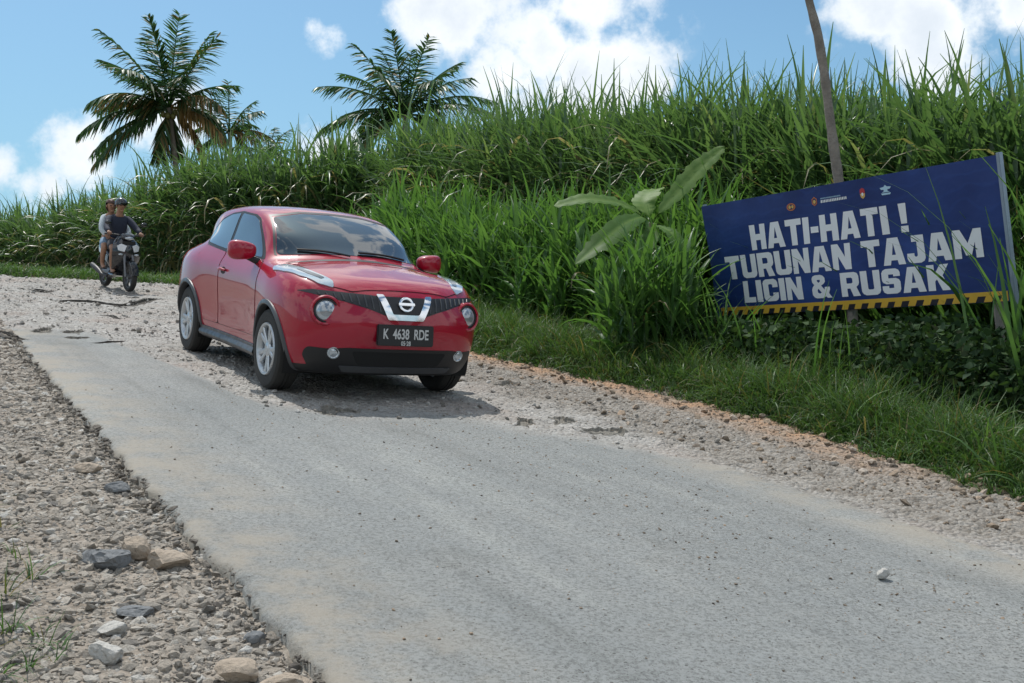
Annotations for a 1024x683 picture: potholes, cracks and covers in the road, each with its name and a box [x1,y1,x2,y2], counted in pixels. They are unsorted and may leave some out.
pothole [548,416,575,426]
pothole [583,426,629,436]
pothole [516,417,534,427]
crack [29,289,159,319]
